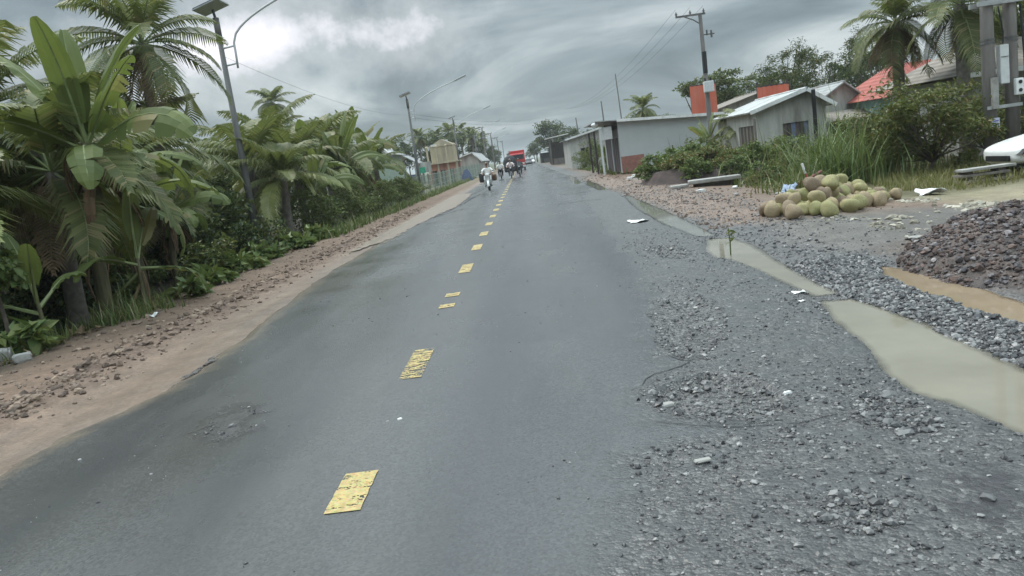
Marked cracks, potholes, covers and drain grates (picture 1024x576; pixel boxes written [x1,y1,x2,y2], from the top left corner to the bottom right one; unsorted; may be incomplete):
crack [631,354,690,390]
pothole [194,406,266,441]
